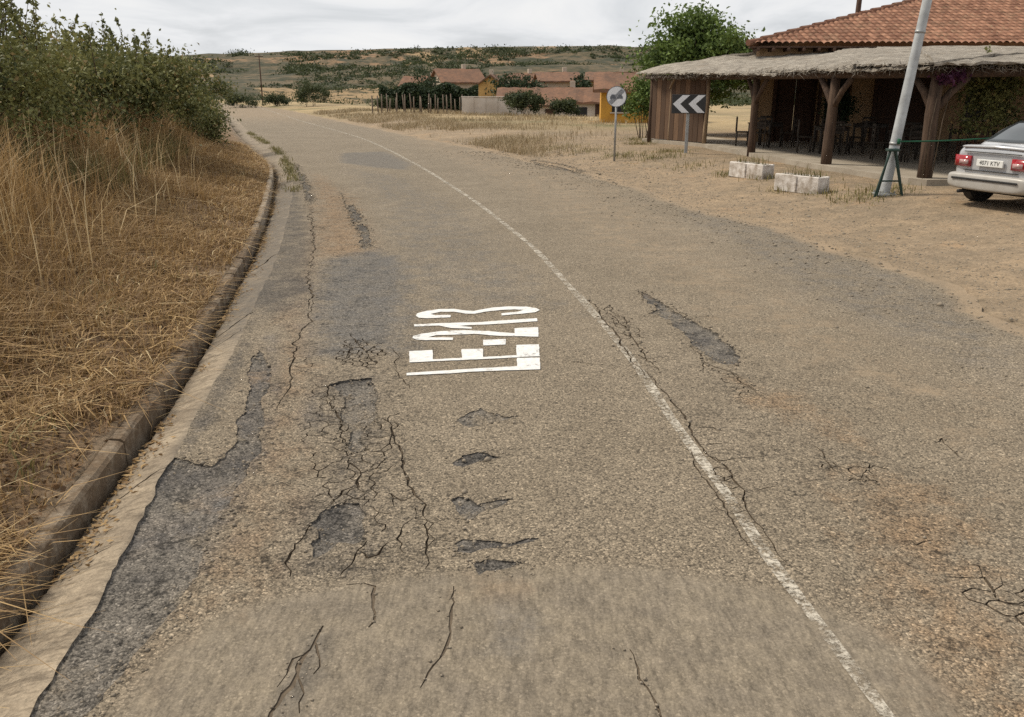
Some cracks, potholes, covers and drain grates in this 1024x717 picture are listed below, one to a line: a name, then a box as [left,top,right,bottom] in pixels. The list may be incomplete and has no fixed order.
pothole [329,378,379,454]
crack [284,385,452,627]
crack [629,649,662,717]
crack [268,626,324,717]
crack [792,442,888,485]
crack [420,586,455,688]
pothole [457,408,518,427]
pothole [311,503,367,558]
pothole [451,496,511,520]
crack [277,207,325,410]
crack [953,564,1024,626]
pothole [472,560,524,575]
